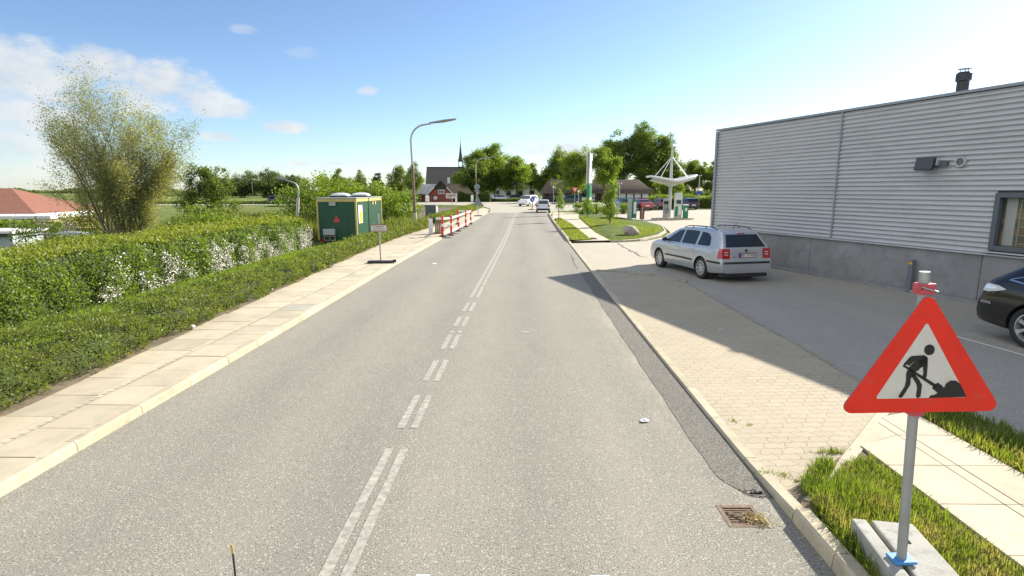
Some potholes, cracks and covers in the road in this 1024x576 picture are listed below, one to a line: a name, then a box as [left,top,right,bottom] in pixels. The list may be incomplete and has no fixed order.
drain grate [715,505,781,527]
